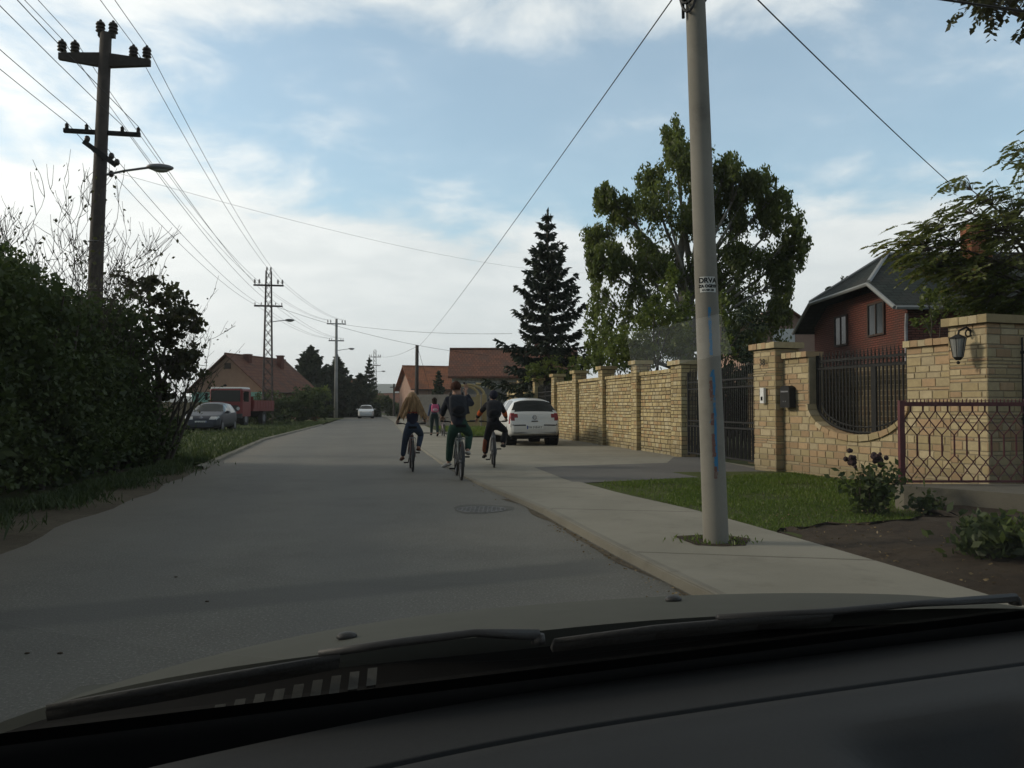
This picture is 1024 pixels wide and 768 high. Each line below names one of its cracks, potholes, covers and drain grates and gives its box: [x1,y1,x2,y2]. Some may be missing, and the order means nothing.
manhole cover [454,504,514,514]
